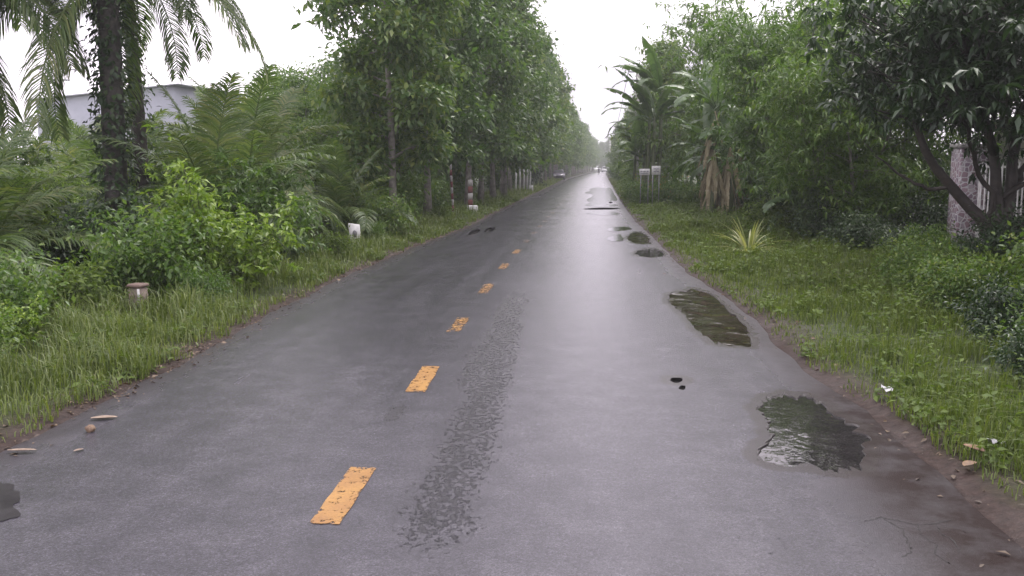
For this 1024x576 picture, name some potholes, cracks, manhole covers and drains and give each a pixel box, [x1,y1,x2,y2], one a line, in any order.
pothole [627,231,650,244]
pothole [668,288,752,347]
crack [864,516,959,564]
pothole [634,248,664,258]
pothole [756,392,871,473]
